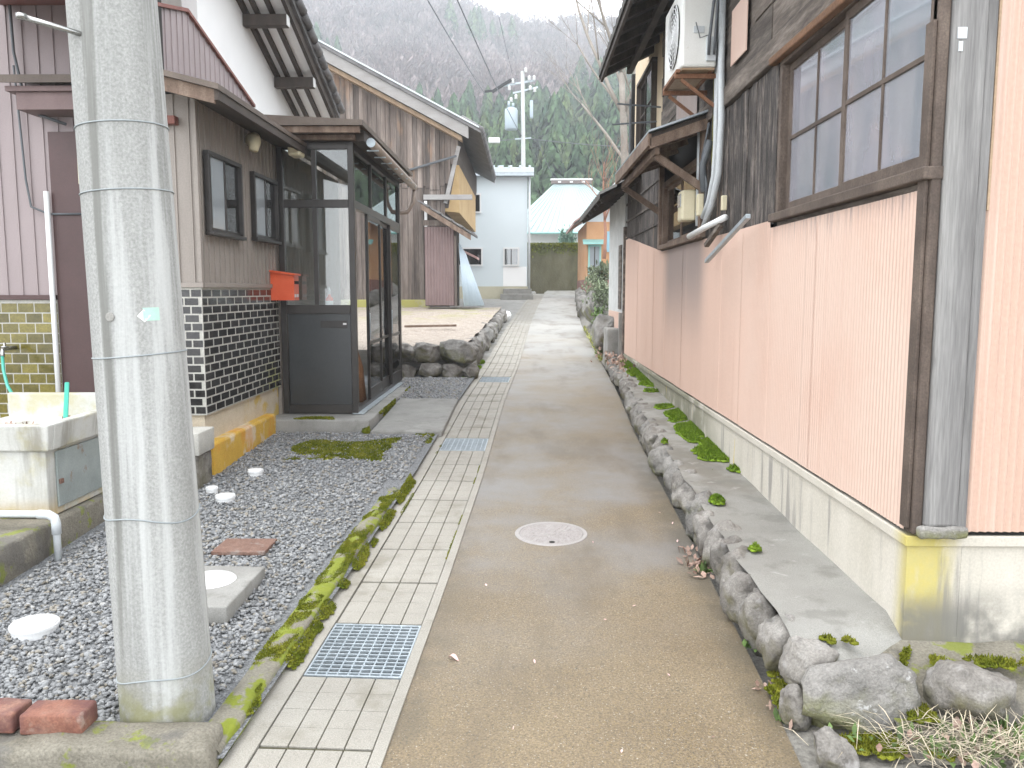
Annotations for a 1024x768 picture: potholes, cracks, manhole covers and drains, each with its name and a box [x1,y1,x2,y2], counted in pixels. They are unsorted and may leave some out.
manhole cover [515,522,588,546]
drain grate [439,438,488,451]
drain grate [304,623,421,681]
